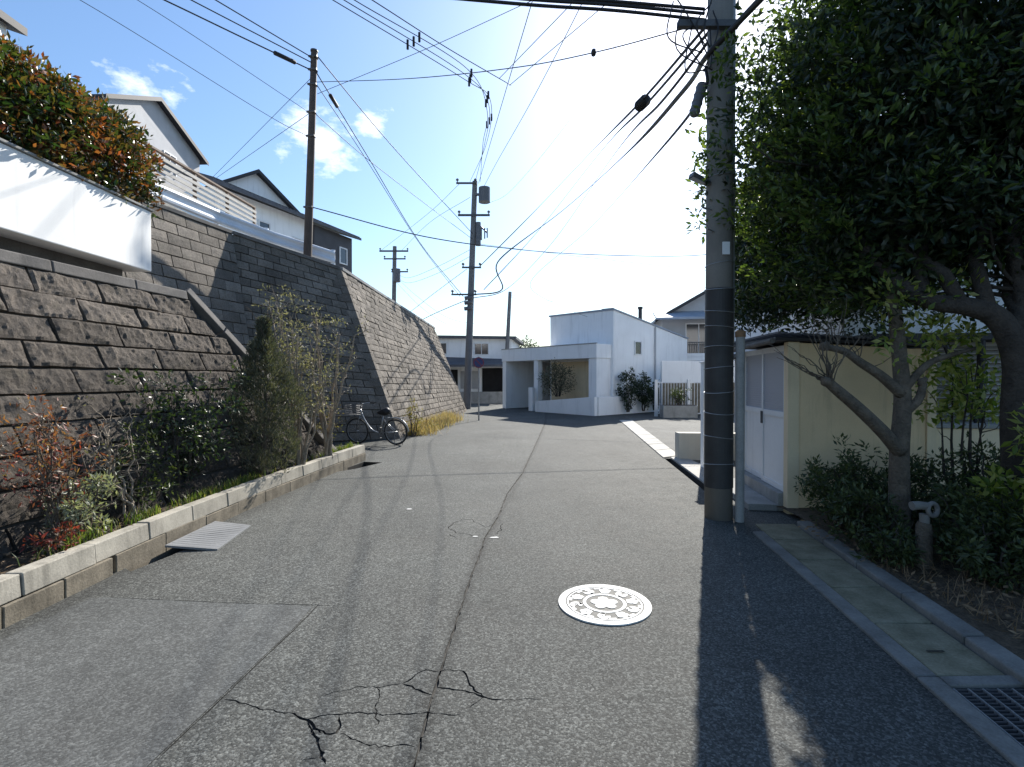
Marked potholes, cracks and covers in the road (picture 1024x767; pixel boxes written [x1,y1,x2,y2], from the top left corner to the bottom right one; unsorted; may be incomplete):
drain grate [953,688,1024,748]
manhole cover [558,584,652,626]
crack [115,423,545,767]
